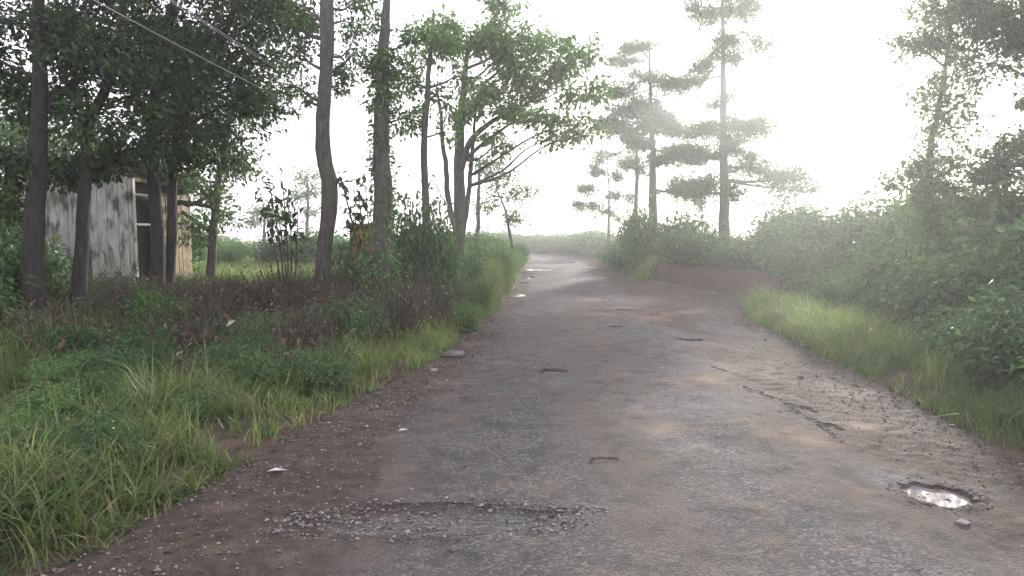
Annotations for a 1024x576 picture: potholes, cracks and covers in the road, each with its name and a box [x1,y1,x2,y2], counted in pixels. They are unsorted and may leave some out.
pothole [884,476,993,513]
crack [709,366,846,442]
pothole [253,494,622,543]
